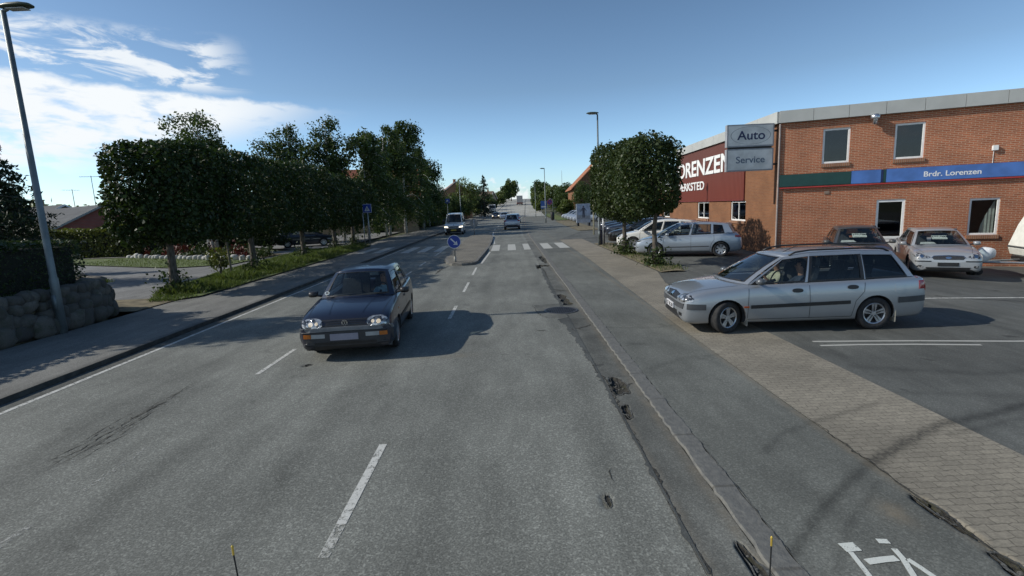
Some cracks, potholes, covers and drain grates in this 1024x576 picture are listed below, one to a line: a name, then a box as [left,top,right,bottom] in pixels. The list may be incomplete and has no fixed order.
pothole [607,376,630,396]
crack [586,352,712,576]
pothole [620,404,634,419]
